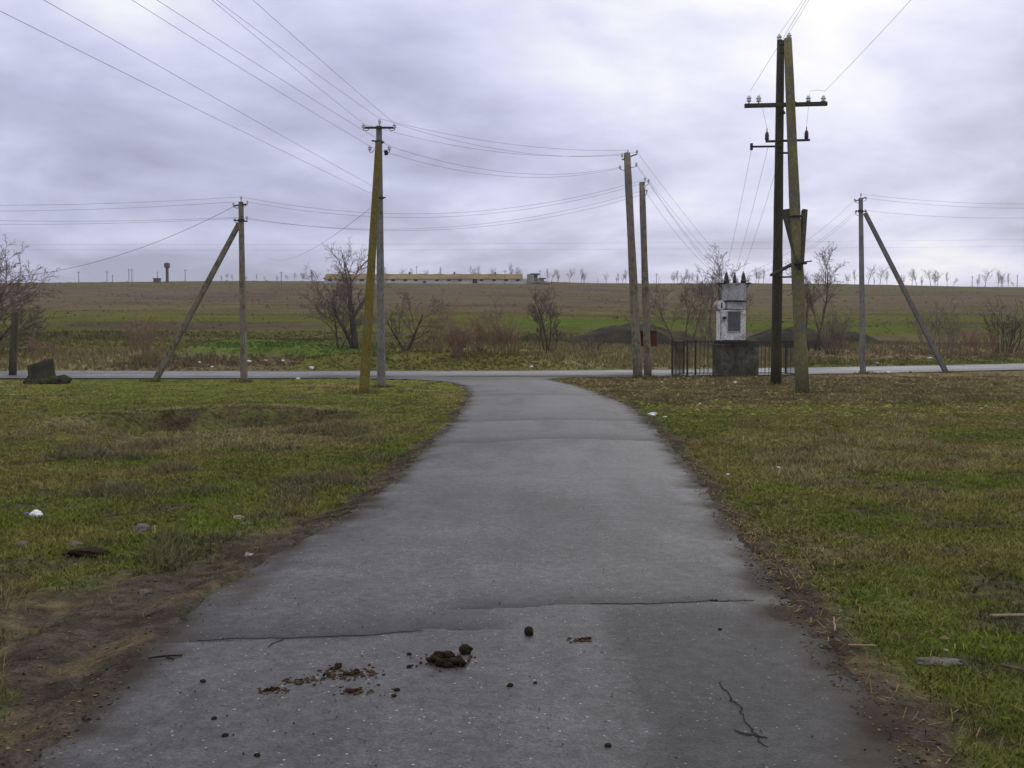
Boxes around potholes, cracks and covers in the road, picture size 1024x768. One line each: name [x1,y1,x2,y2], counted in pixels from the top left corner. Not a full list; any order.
crack [196,630,423,647]
crack [718,681,768,747]
